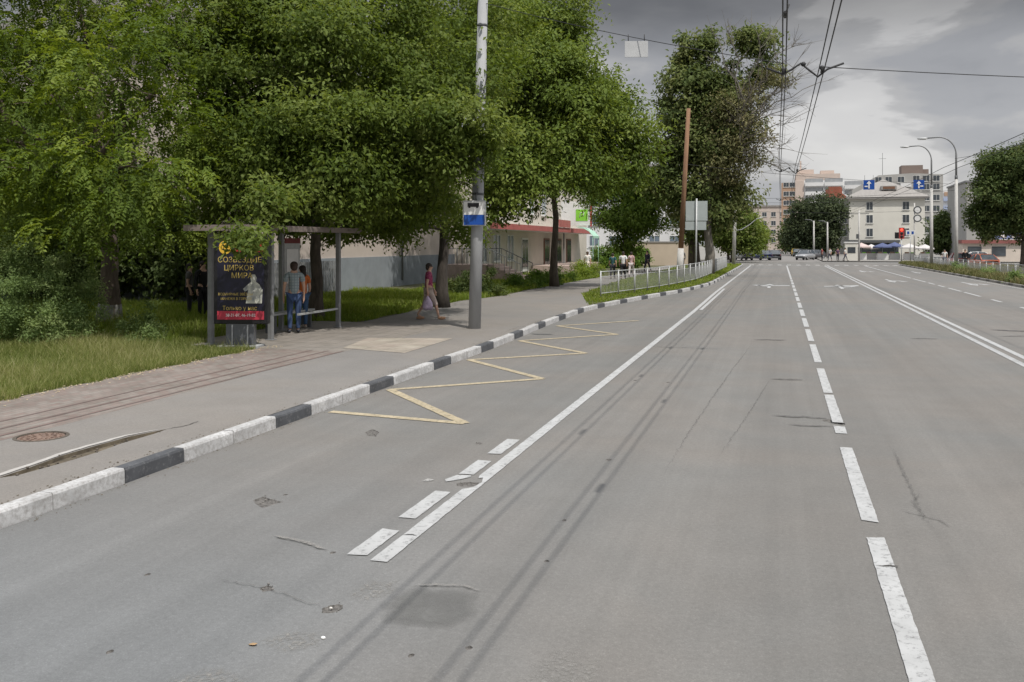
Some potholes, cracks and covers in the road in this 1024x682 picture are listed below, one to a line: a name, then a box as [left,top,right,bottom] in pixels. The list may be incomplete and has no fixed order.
crack [275,535,326,549]
crack [777,415,827,426]
manhole cover [12,431,70,442]
pothole [322,602,343,613]
pothole [253,495,281,508]
